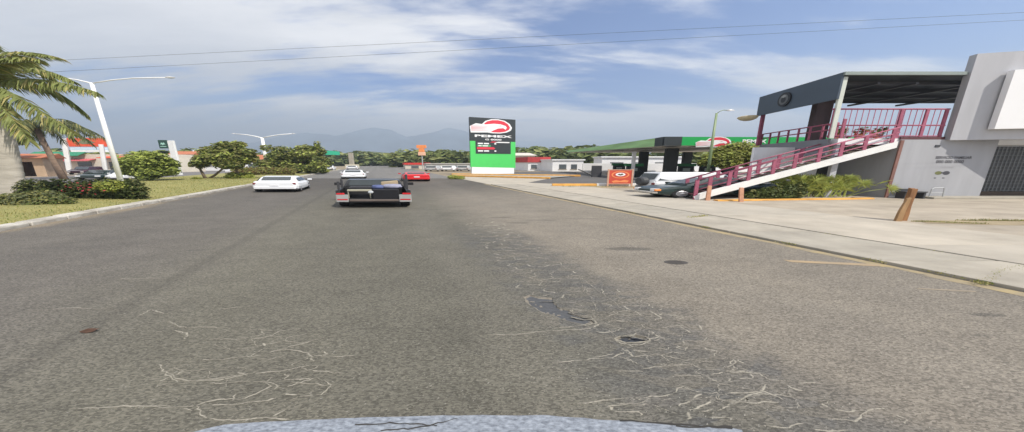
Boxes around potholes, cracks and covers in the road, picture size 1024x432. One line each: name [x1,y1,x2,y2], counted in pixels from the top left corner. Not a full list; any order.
crack [465,221,909,432]
crack [24,305,456,431]
pothole [523,295,597,325]
pothole [614,334,651,343]
